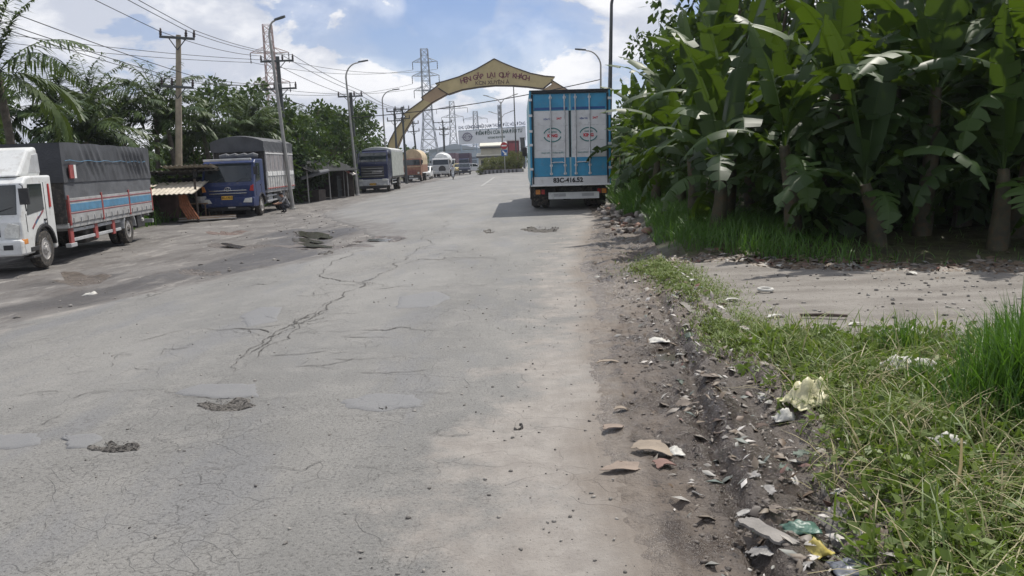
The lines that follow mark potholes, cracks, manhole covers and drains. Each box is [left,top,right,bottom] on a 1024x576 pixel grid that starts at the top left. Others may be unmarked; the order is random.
pothole [197,397,256,411]
pothole [287,236,324,244]
pothole [293,231,334,240]
pothole [87,440,140,453]
crack [18,256,489,434]
